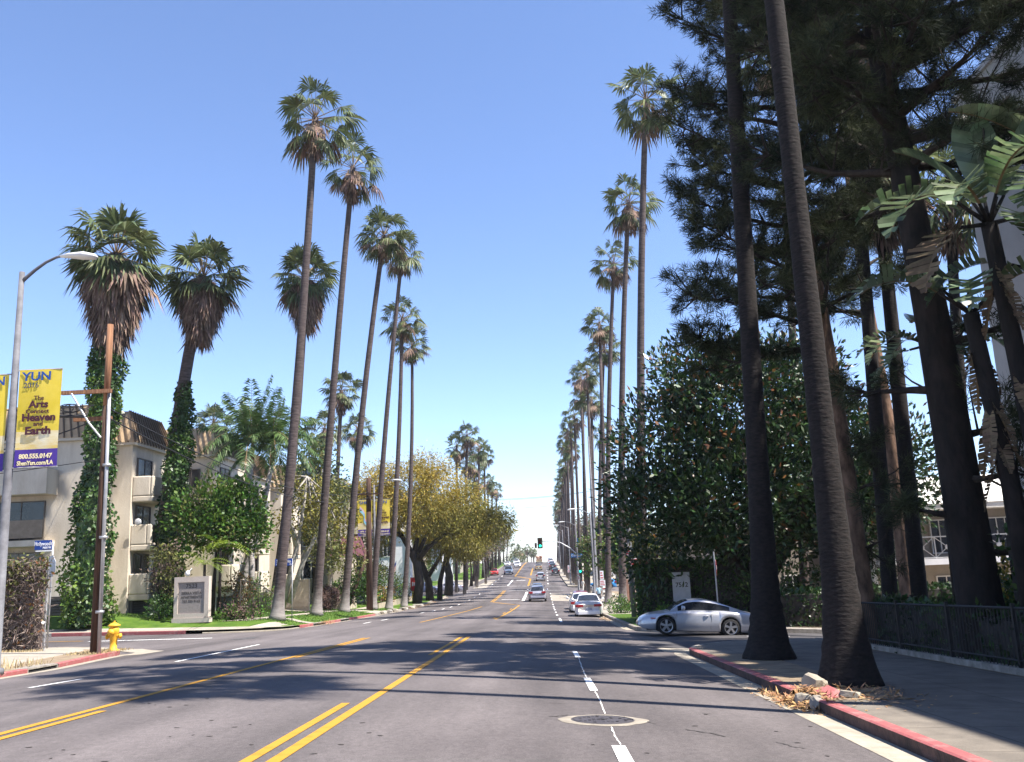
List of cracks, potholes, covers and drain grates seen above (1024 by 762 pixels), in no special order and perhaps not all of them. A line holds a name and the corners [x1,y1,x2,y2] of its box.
manhole cover [558,715,649,726]
